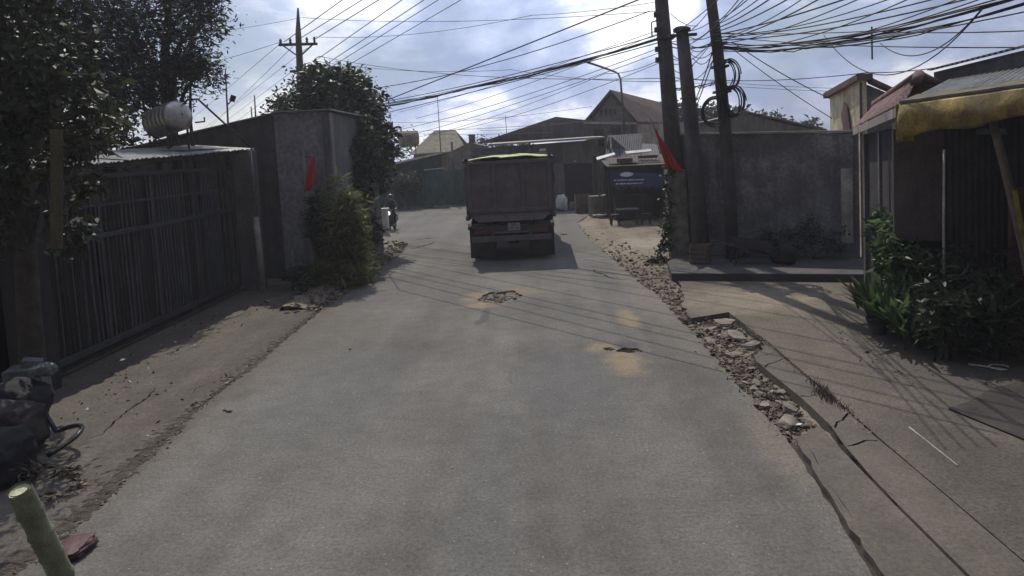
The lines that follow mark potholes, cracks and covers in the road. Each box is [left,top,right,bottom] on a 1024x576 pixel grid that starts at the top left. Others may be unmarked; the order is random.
pothole [478,290,522,303]
